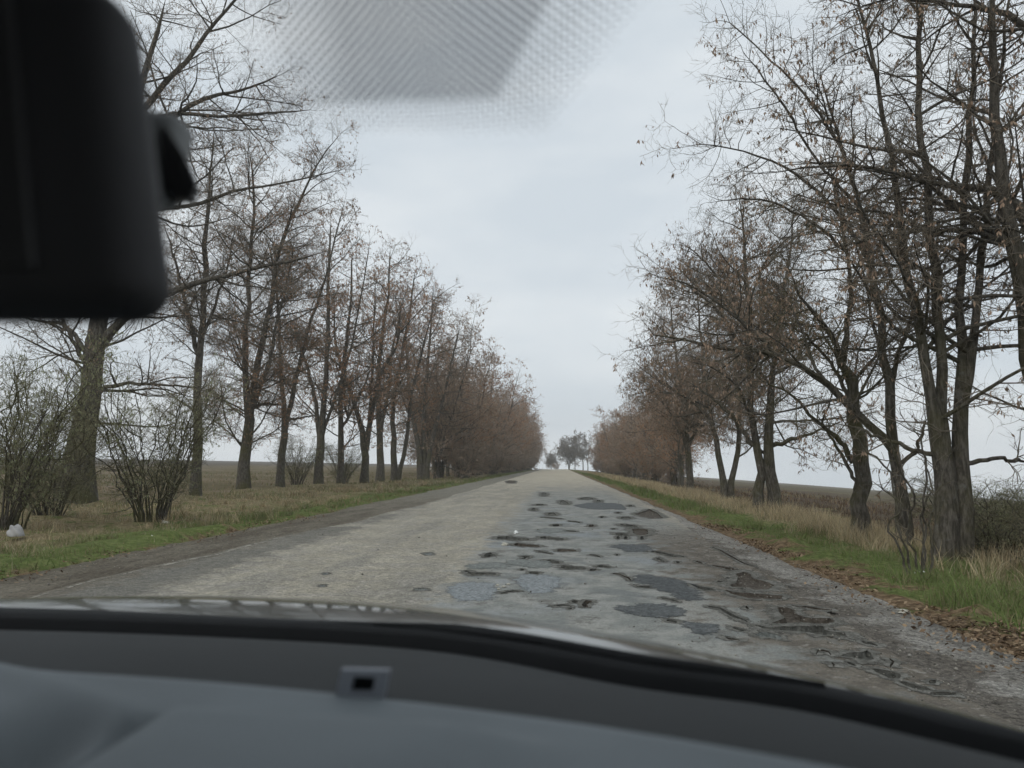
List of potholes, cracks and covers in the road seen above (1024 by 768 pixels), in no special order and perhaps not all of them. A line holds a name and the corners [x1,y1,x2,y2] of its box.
pothole [629,509,668,519]
pothole [624,528,658,537]
pothole [716,569,791,592]
pothole [577,599,596,608]
pothole [760,603,853,628]
